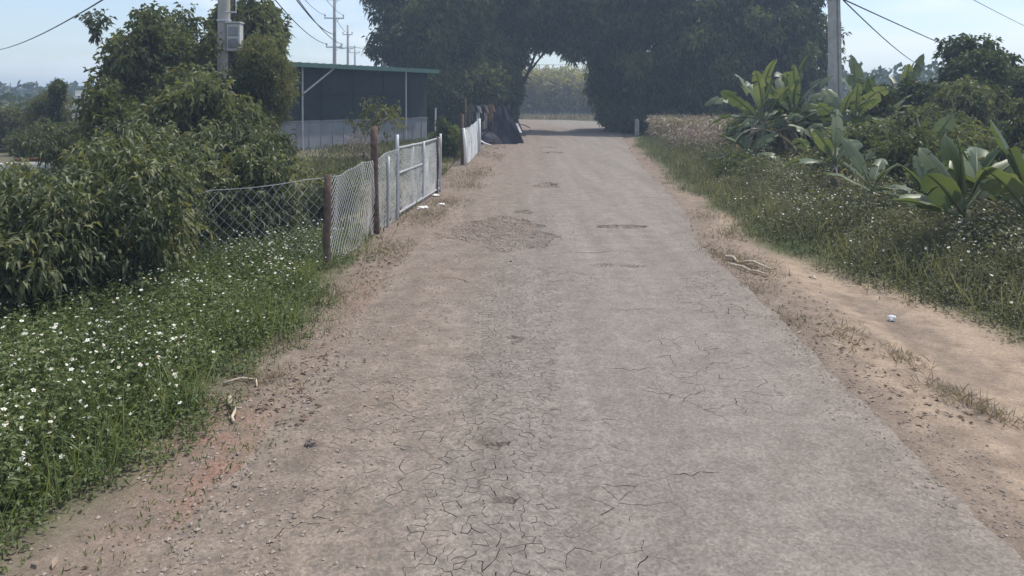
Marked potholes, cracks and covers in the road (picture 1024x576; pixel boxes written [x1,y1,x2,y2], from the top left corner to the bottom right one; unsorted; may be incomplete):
crack [257,251,801,576]
pothole [477,439,511,450]
pothole [488,496,518,504]
